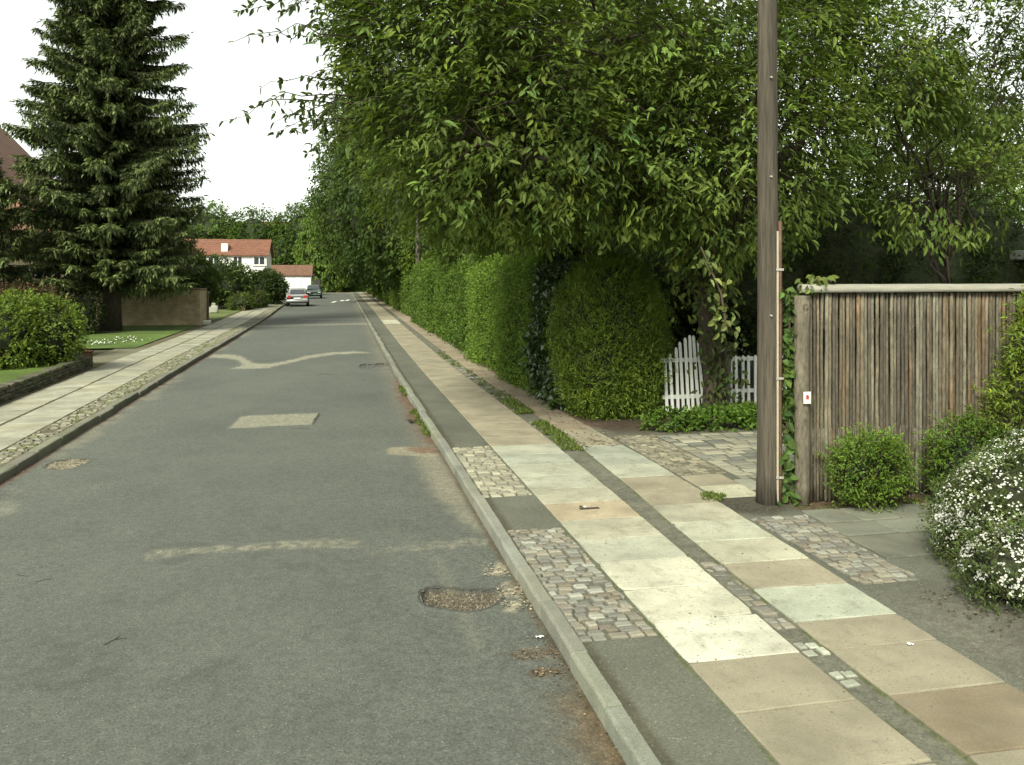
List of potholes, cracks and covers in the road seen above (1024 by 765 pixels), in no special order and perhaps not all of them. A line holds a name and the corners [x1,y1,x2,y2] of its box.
pothole [413,584,511,615]
